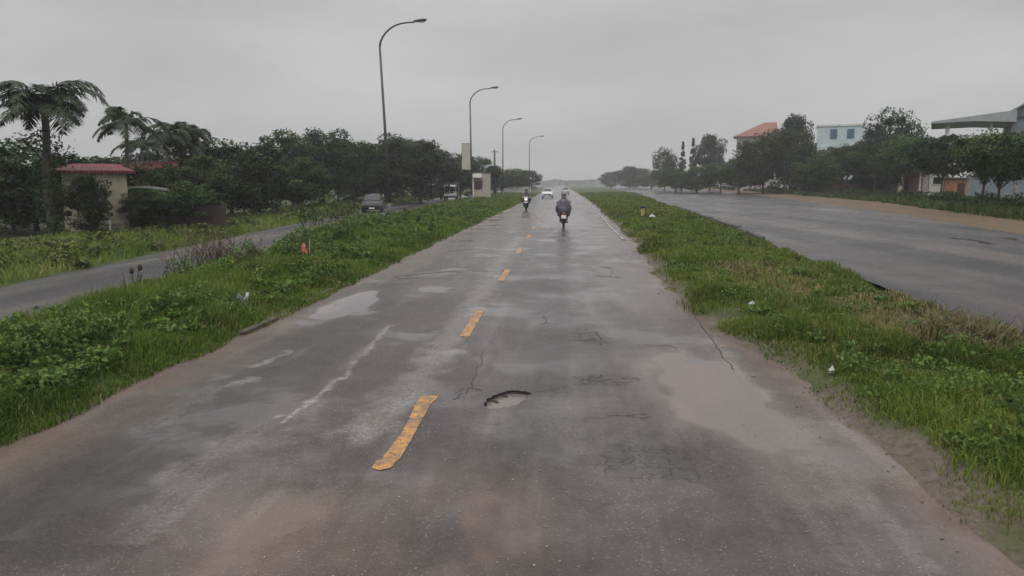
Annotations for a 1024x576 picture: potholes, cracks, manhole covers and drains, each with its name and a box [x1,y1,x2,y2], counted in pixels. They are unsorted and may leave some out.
crack [536,374,638,392]
pothole [484,390,532,409]
crack [594,442,713,483]
